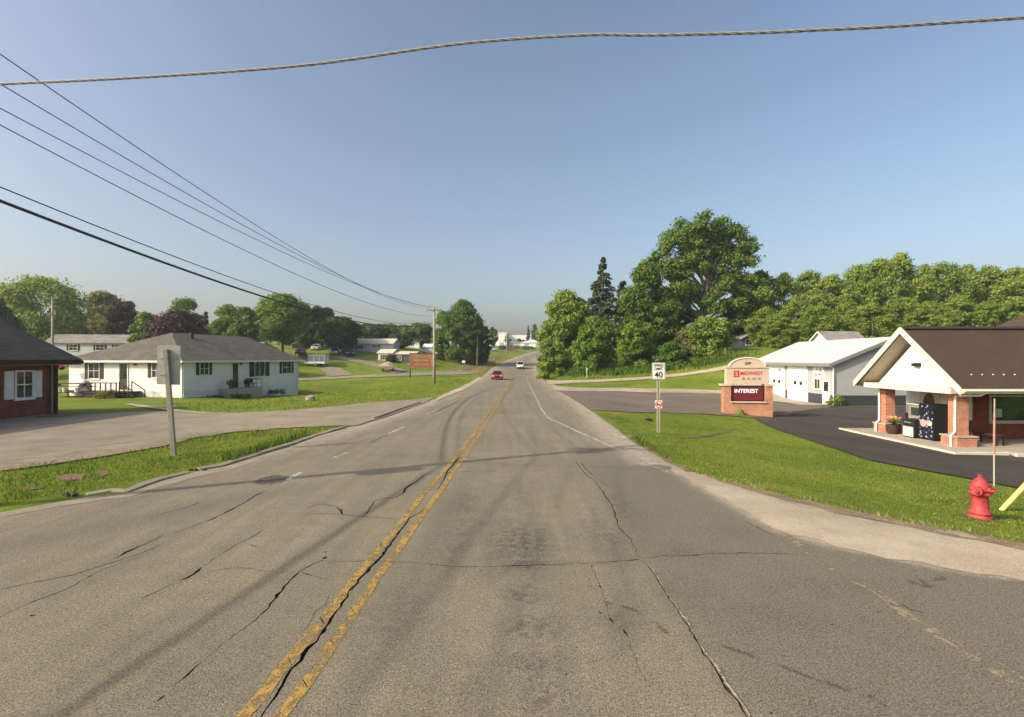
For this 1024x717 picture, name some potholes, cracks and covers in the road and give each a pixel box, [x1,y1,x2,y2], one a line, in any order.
crack [156,458,807,717]
crack [0,535,163,617]
